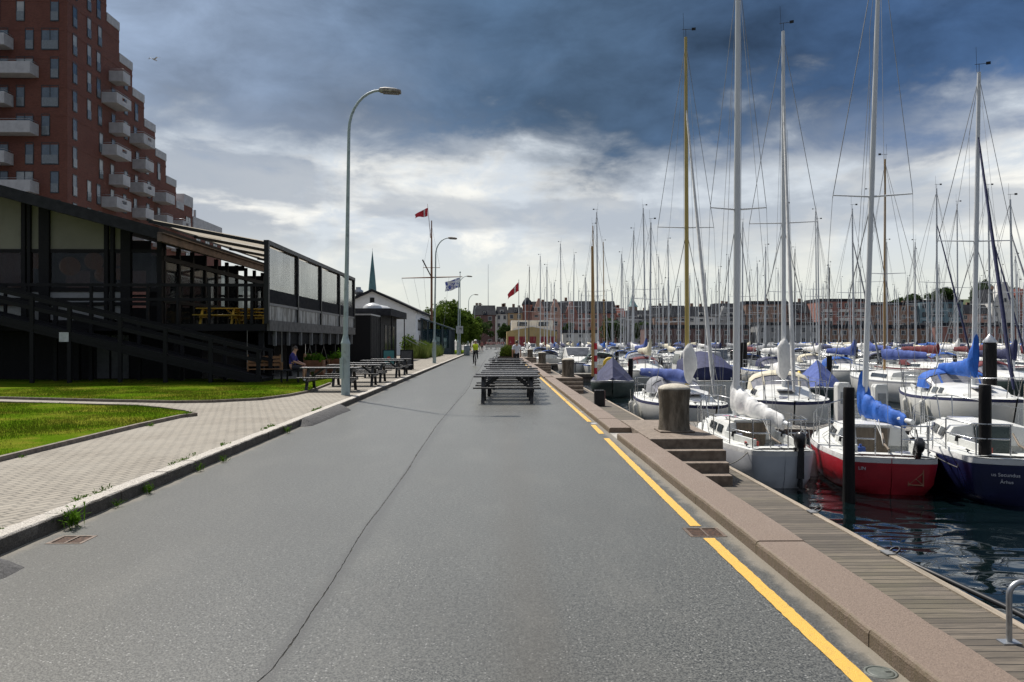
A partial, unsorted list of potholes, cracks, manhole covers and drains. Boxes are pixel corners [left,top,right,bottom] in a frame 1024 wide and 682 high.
manhole cover [863,665,899,679]
drain grate [45,535,98,544]
drain grate [682,528,727,537]
crack [257,362,484,682]
